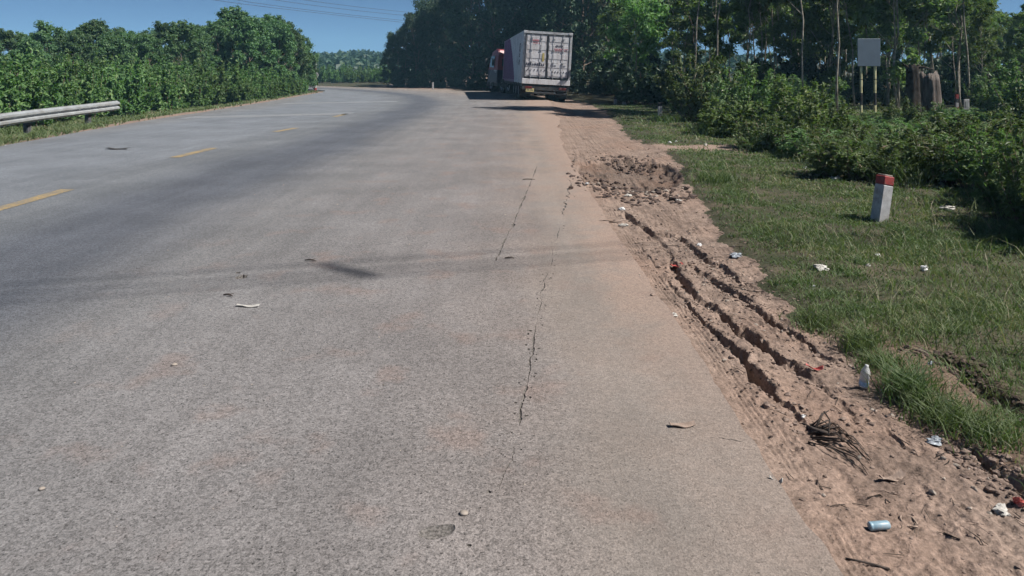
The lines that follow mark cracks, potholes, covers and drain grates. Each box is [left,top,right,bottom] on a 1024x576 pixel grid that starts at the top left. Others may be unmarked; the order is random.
crack [467,225,564,547]
